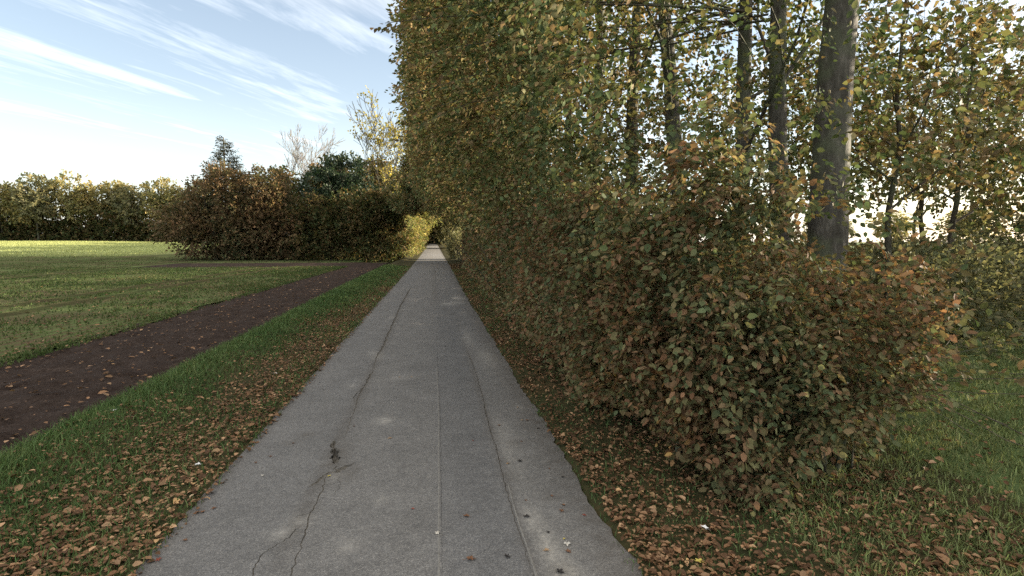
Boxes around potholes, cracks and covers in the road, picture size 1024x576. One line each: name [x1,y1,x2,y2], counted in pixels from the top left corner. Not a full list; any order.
crack [252,462,355,576]
crack [346,288,411,433]
pothole [329,440,342,464]
